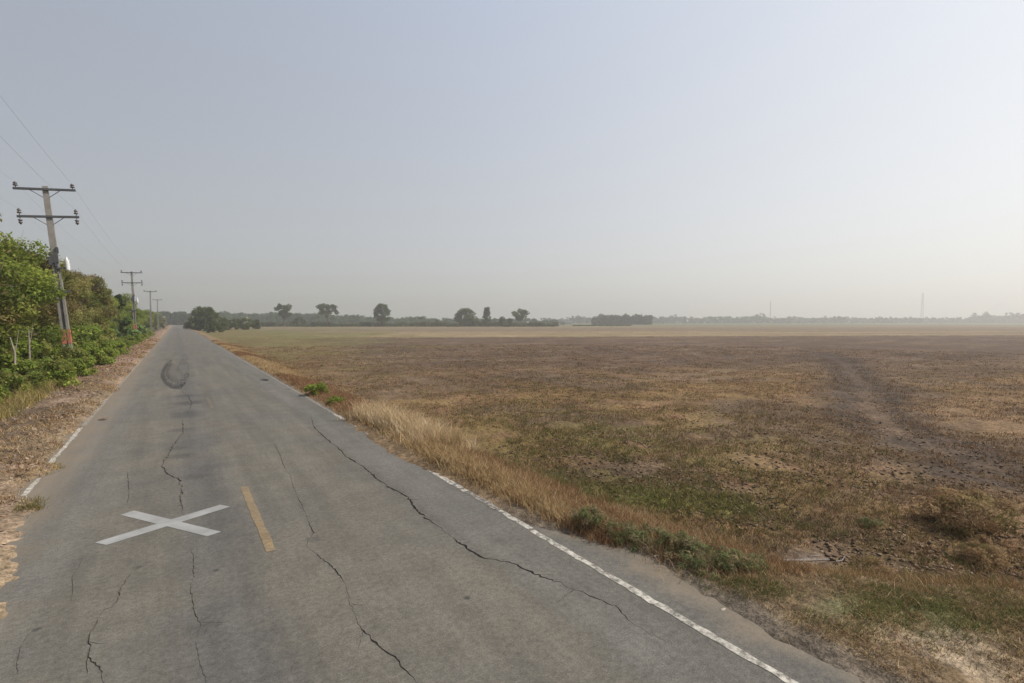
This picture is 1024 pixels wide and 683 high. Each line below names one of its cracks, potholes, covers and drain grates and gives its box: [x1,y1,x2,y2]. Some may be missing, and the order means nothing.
crack [310,416,666,643]
crack [160,391,192,514]
crack [171,552,225,683]
crack [274,443,416,682]
crack [85,569,136,683]
